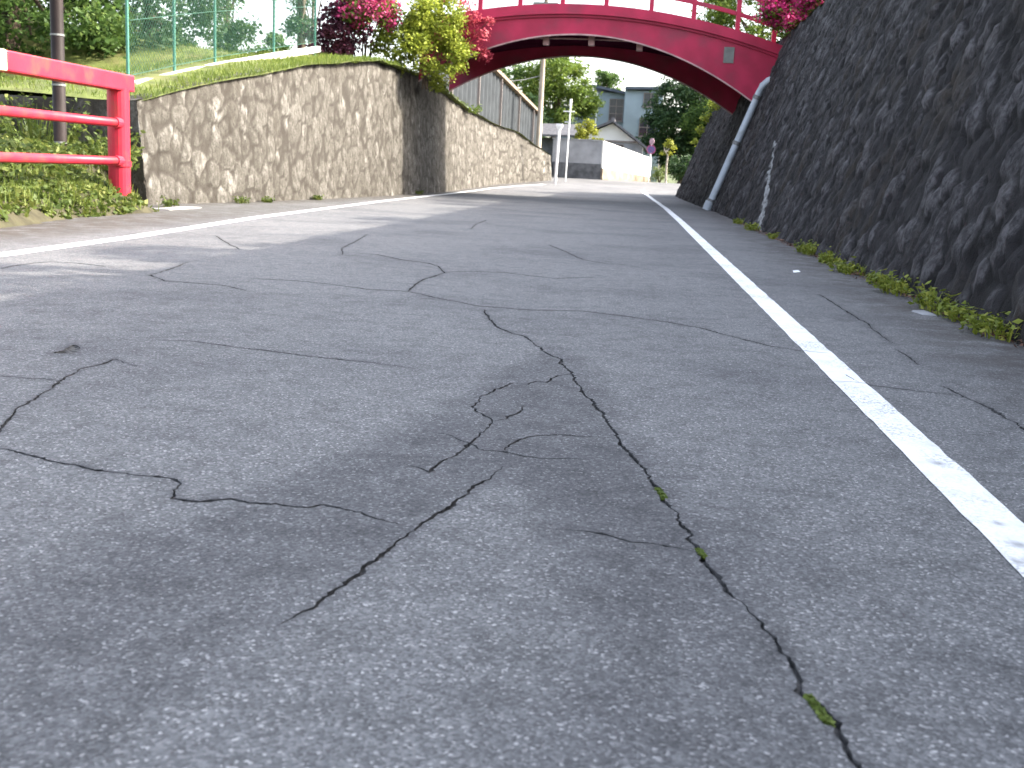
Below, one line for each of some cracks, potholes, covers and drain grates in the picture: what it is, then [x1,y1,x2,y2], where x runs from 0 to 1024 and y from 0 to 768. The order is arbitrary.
crack [832,382,1024,430]
crack [820,295,917,364]
crack [0,245,862,768]
pothole [53,345,80,354]
